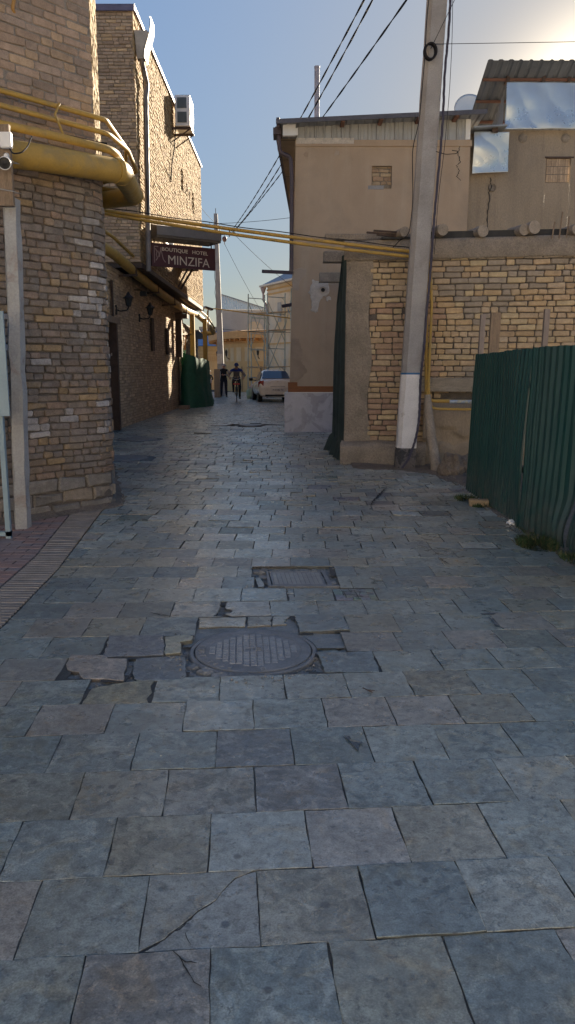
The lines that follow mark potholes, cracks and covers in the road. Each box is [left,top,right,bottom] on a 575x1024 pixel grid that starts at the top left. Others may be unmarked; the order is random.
manhole cover [183,618,345,676]
crack [147,873,250,986]
pothole [111,660,136,685]
